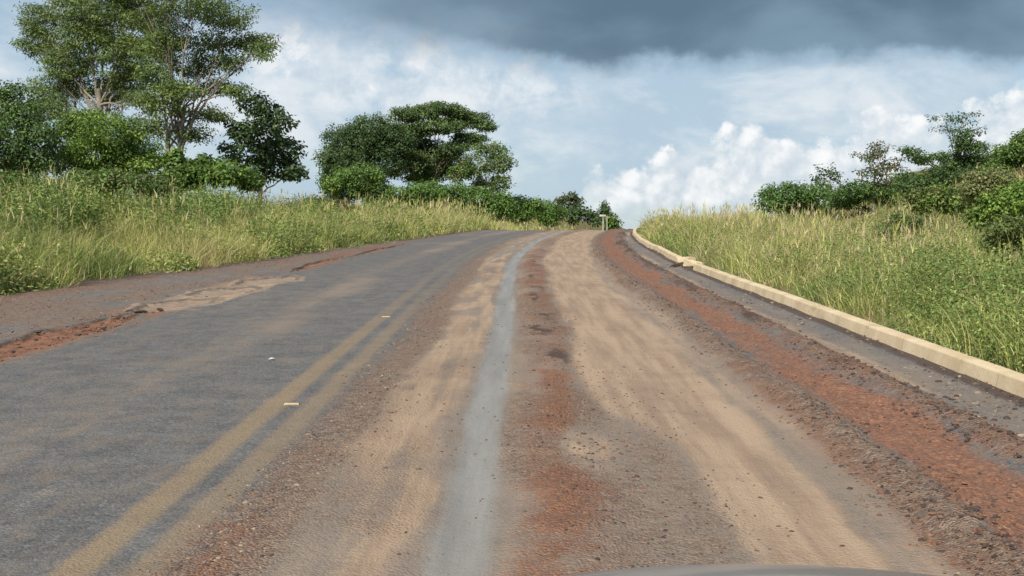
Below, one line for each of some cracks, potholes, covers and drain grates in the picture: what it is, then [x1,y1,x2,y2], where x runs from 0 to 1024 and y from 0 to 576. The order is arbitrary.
pothole [0,311,152,364]
pothole [172,286,269,298]
pothole [226,275,306,286]
pothole [124,297,226,312]
pothole [347,243,410,258]
pothole [286,256,350,272]
